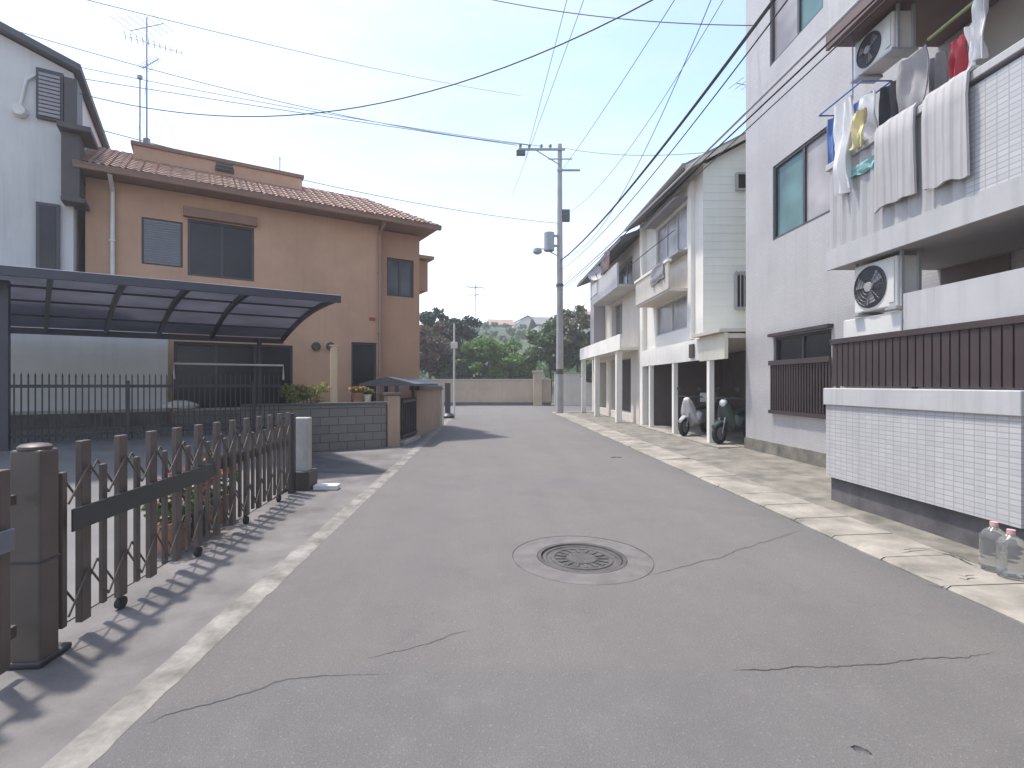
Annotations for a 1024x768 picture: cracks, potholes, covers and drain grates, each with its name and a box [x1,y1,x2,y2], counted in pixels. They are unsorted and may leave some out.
crack [741,652,993,671]
manhole cover [512,536,654,585]
crack [144,674,363,724]
pothole [850,745,873,755]
crack [649,530,799,575]
crack [899,548,973,580]
